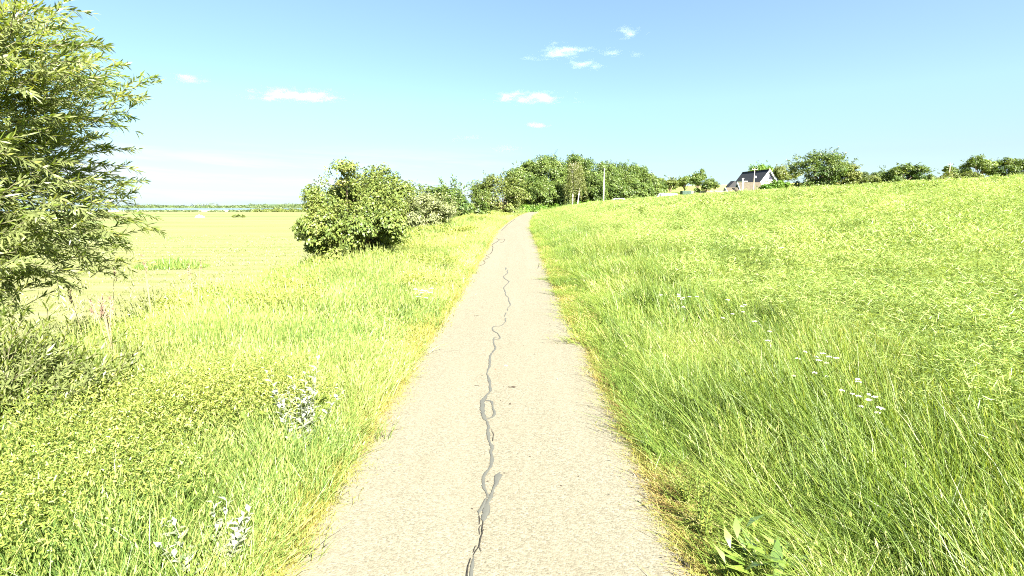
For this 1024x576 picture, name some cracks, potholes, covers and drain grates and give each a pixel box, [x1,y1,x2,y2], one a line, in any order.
crack [466,219,515,576]
